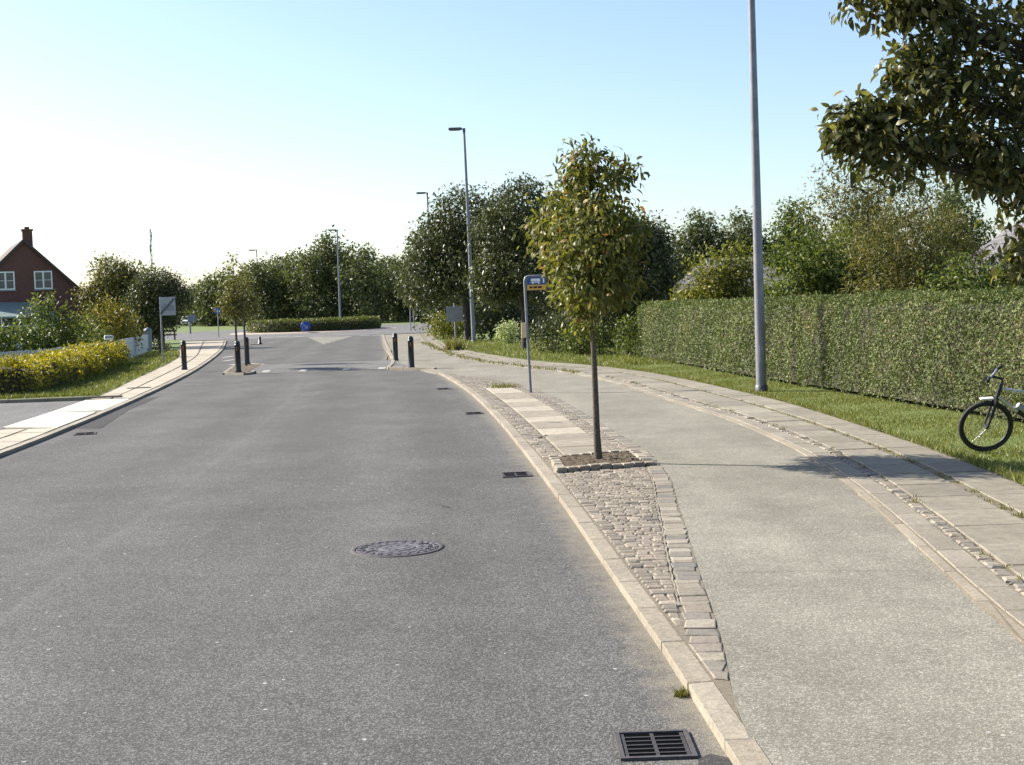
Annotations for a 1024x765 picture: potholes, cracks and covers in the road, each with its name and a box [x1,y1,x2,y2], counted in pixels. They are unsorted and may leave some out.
drain grate [614,729,698,761]
manhole cover [350,540,444,558]
